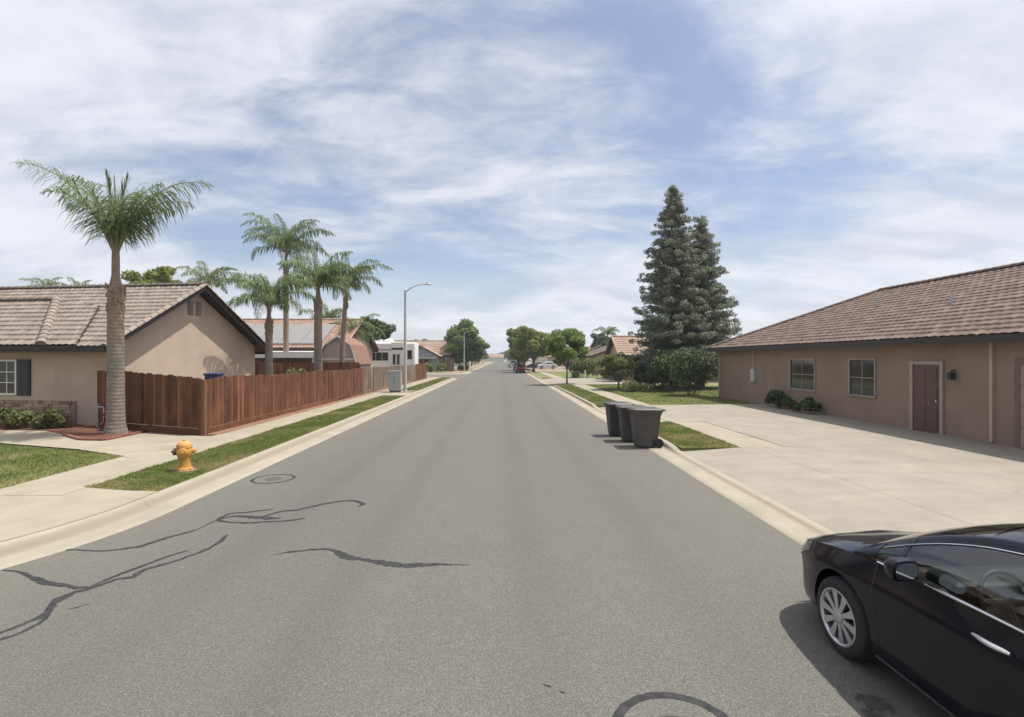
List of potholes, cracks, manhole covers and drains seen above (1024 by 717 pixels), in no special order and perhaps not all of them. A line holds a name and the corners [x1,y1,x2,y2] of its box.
manhole cover [250,474,296,484]
